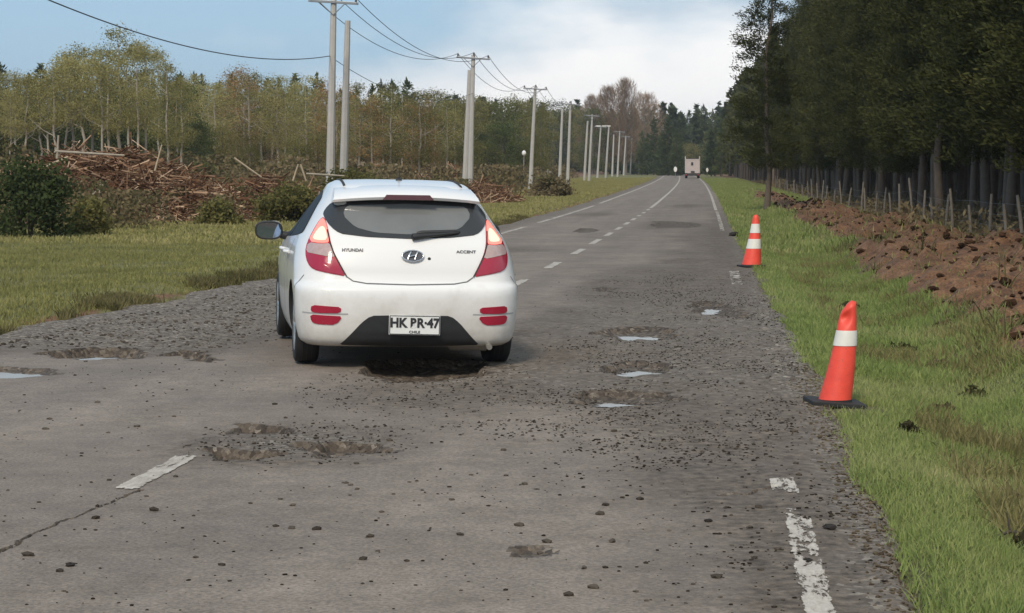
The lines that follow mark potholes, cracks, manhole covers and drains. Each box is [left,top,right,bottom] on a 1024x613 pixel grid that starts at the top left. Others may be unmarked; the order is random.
pothole [0,366,64,378]
pothole [587,326,683,341]
pothole [356,358,498,384]
pothole [32,347,149,360]
pothole [219,423,297,435]
crack [0,489,144,554]
pothole [568,389,688,408]
pothole [283,441,403,459]
pothole [598,360,674,377]
pothole [506,545,561,558]
pothole [199,446,290,461]
pothole [156,350,226,363]
